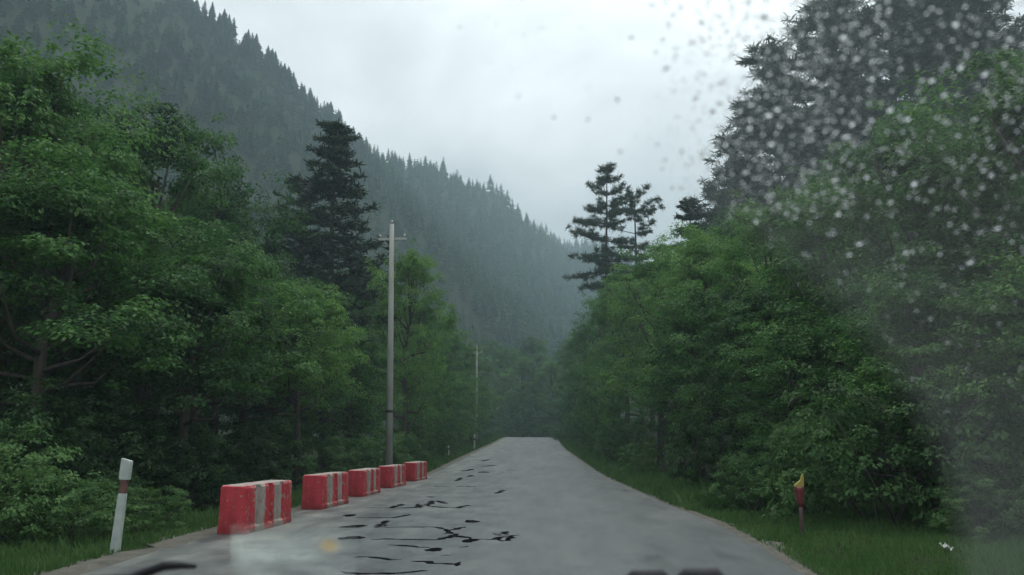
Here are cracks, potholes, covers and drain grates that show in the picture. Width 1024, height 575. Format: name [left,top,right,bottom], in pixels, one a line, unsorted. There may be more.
crack [341,459,517,575]
